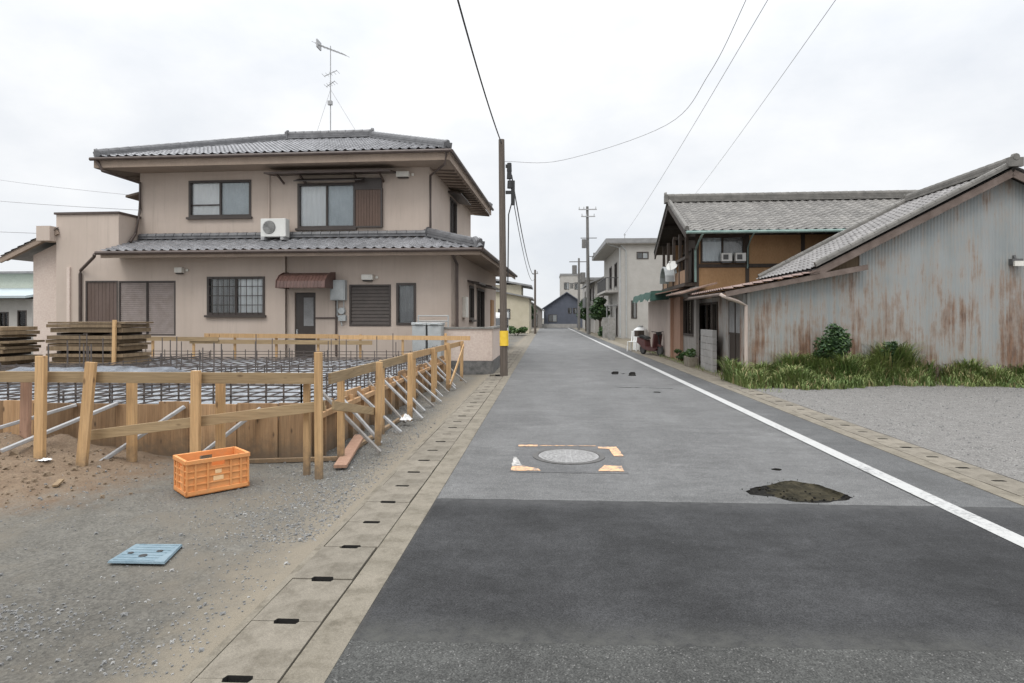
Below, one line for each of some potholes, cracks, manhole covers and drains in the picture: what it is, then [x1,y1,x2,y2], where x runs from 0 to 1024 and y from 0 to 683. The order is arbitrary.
manhole cover [533,448,605,465]
pothole [742,479,853,503]
